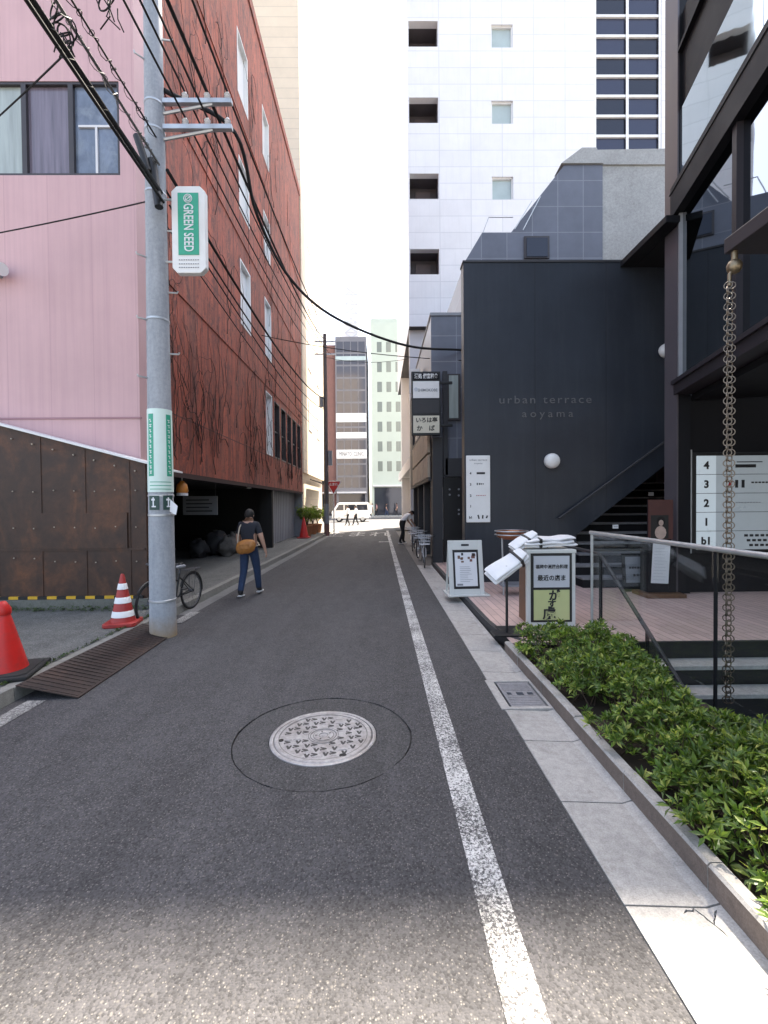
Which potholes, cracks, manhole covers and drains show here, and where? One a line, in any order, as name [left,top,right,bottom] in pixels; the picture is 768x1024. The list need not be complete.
manhole cover [269,711,376,767]
